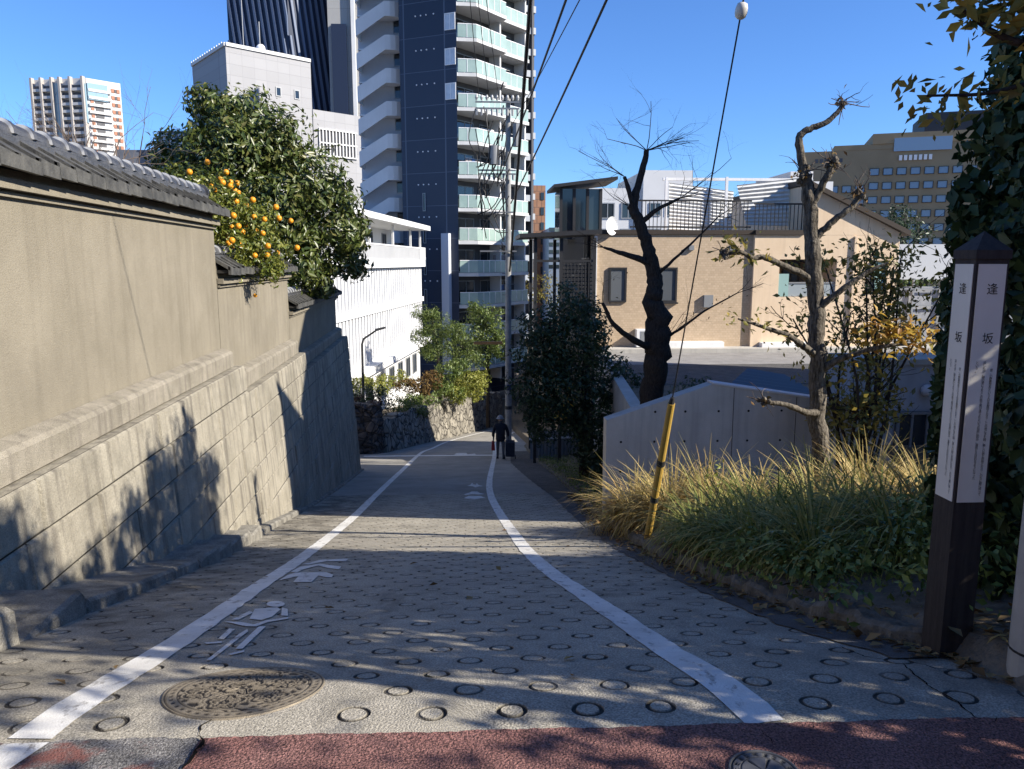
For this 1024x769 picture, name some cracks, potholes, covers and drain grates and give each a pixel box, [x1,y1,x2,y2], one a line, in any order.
manhole cover [161,667,325,720]
manhole cover [728,750,798,769]
crack [839,645,997,723]
